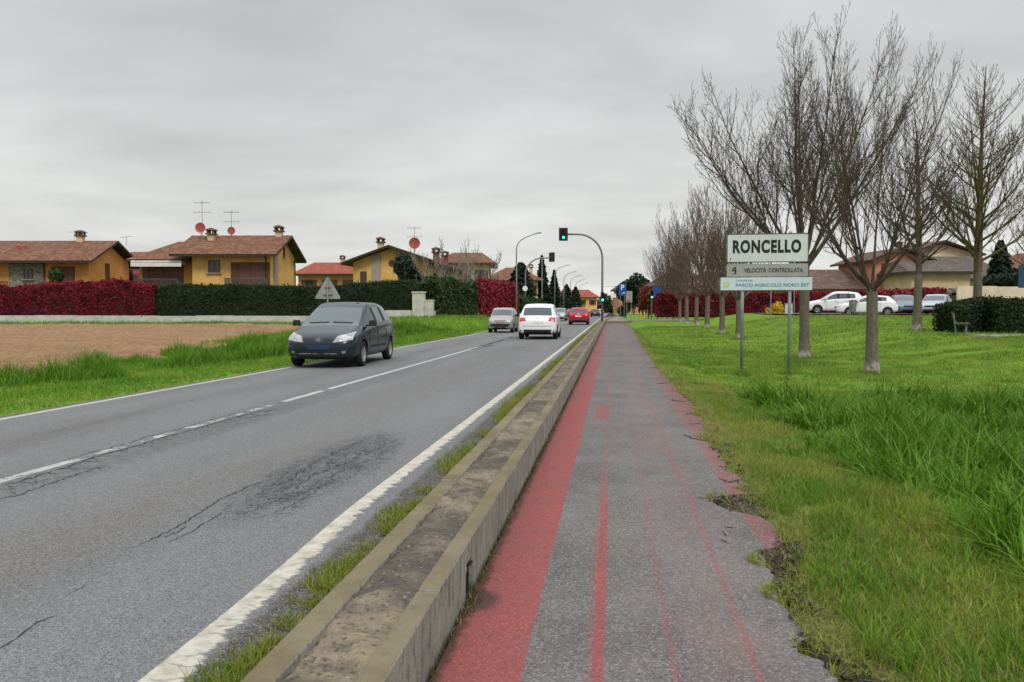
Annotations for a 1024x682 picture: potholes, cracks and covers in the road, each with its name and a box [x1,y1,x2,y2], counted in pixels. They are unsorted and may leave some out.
crack [137,430,403,546]
pothole [754,539,805,573]
pothole [714,494,775,517]
crack [0,408,279,499]
